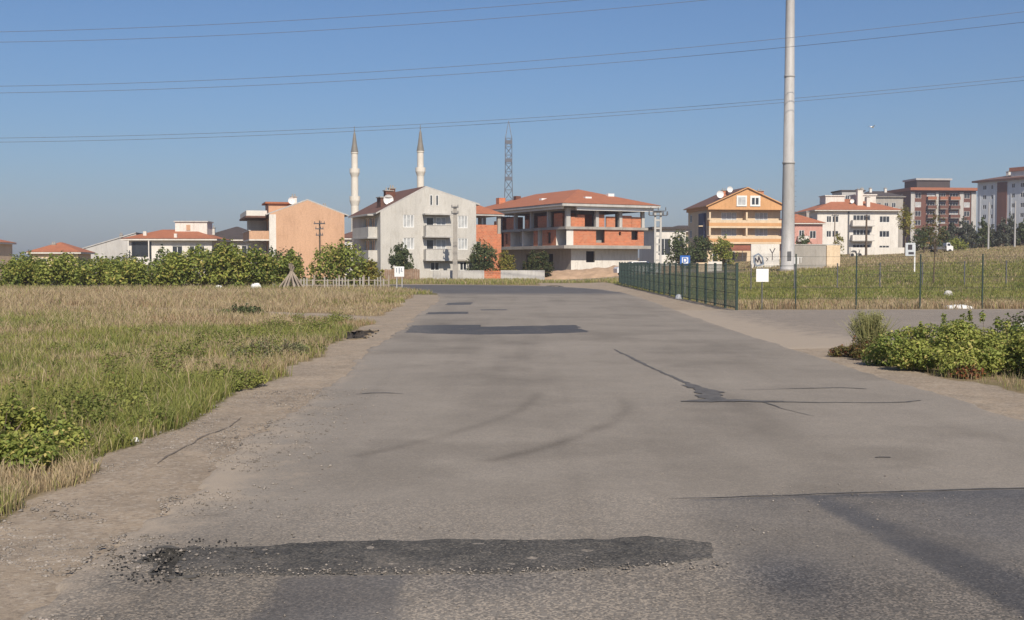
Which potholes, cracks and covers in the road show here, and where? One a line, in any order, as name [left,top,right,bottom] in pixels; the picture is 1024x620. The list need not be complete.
crack [158,417,241,463]
pothole [323,329,379,340]
